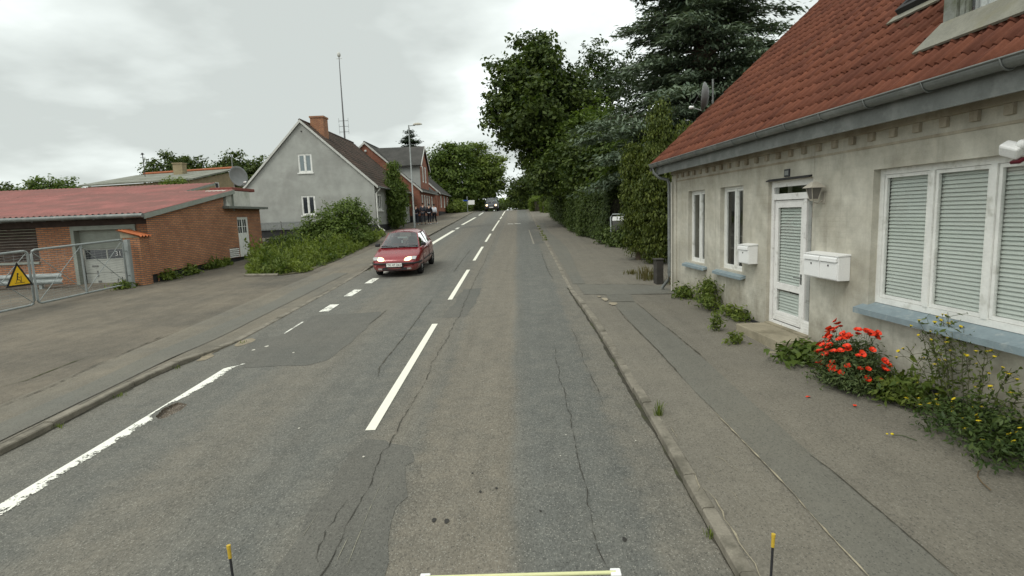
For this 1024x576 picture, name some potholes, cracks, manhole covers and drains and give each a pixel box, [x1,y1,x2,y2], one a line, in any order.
crack [555,349,608,568]
pothole [156,402,187,419]
crack [316,241,494,576]
